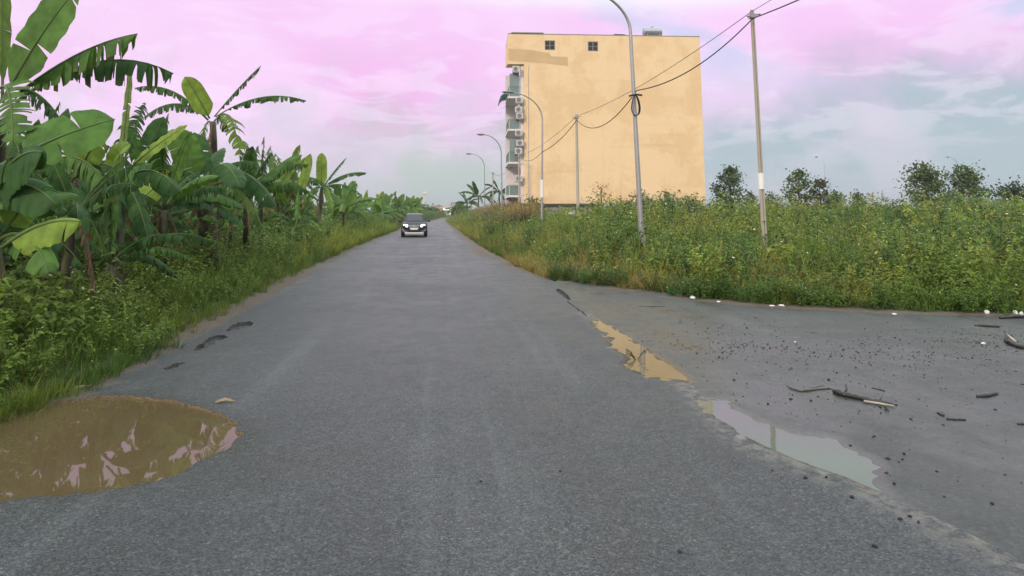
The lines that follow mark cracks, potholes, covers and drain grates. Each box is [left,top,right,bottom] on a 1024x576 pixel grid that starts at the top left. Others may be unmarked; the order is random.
pothole [227,321,253,331]
pothole [194,335,228,351]
pothole [2,395,244,435]
